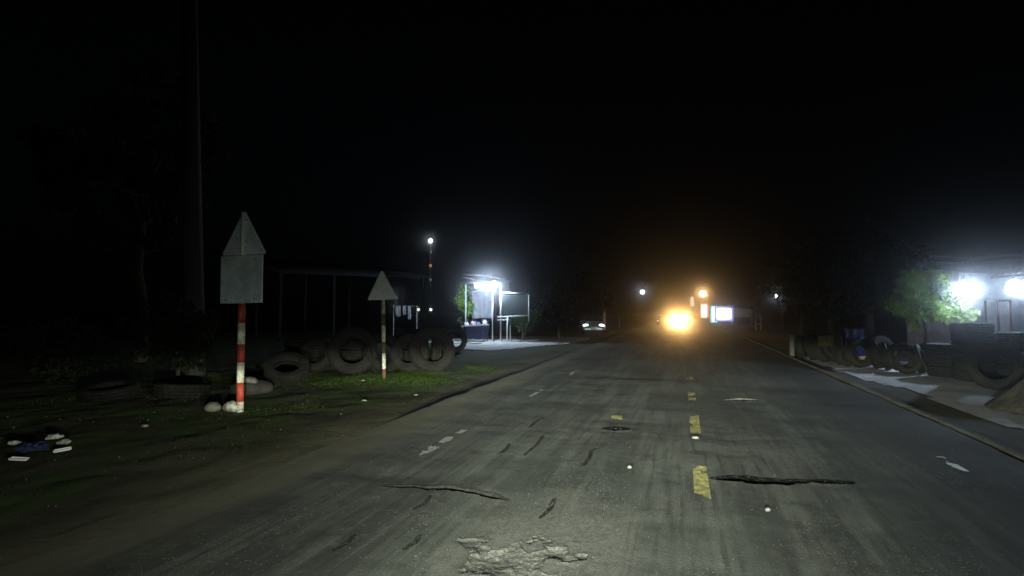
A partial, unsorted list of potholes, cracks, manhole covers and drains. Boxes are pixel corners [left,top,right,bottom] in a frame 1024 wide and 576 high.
crack [412,495,432,510]
crack [498,417,545,455]
crack [332,534,356,552]
pothole [455,535,588,576]
crack [538,498,556,518]
crack [581,448,598,466]
crack [402,534,422,550]
